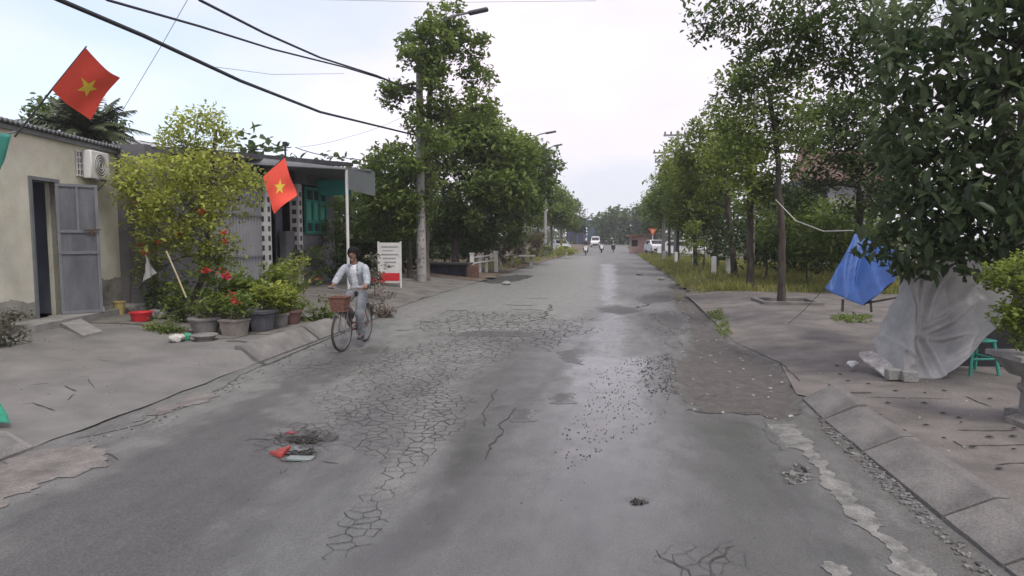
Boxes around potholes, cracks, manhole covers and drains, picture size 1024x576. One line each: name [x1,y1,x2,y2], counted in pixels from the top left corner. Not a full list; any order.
pothole [783,465,811,483]
crack [248,293,693,559]
crack [641,540,750,576]
pothole [273,429,339,445]
